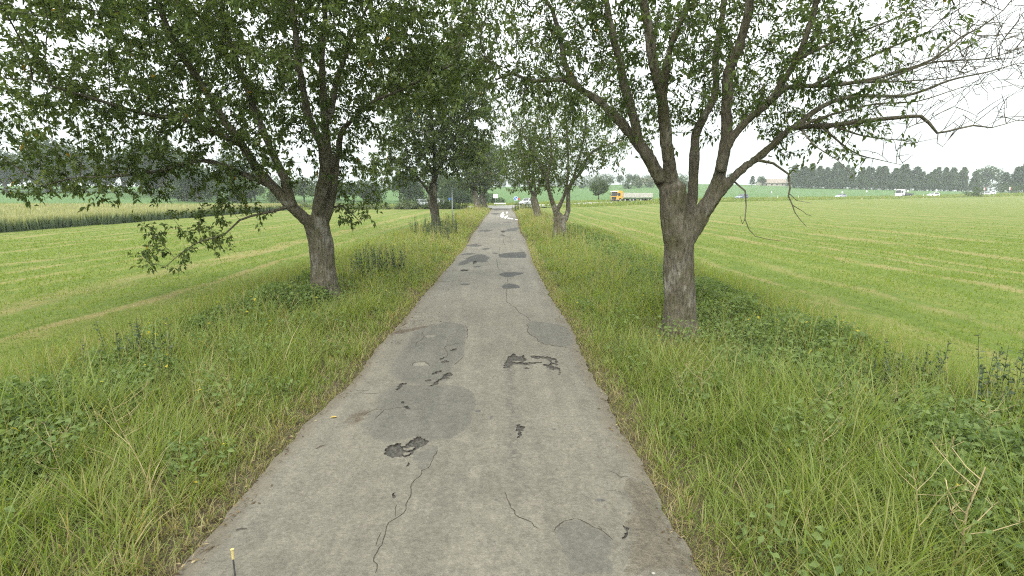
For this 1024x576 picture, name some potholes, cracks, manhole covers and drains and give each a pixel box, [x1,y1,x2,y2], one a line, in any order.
crack [440,239,575,350]
pothole [530,355,561,375]
pothole [384,436,429,458]
crack [373,452,437,573]
crack [504,491,613,540]
pothole [503,353,542,368]
